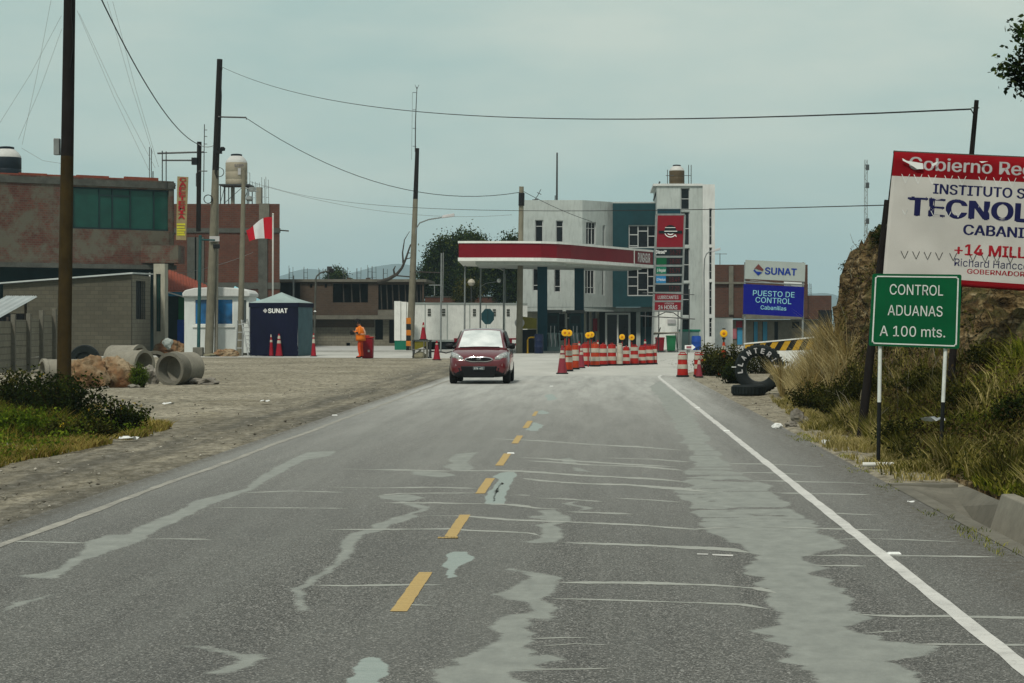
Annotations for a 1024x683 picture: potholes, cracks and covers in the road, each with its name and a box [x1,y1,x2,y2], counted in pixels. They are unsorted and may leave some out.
crack [859,614,1024,633]
crack [727,463,870,495]
crack [533,637,604,646]
crack [778,513,989,567]
crack [552,581,776,609]
crack [222,439,750,553]
